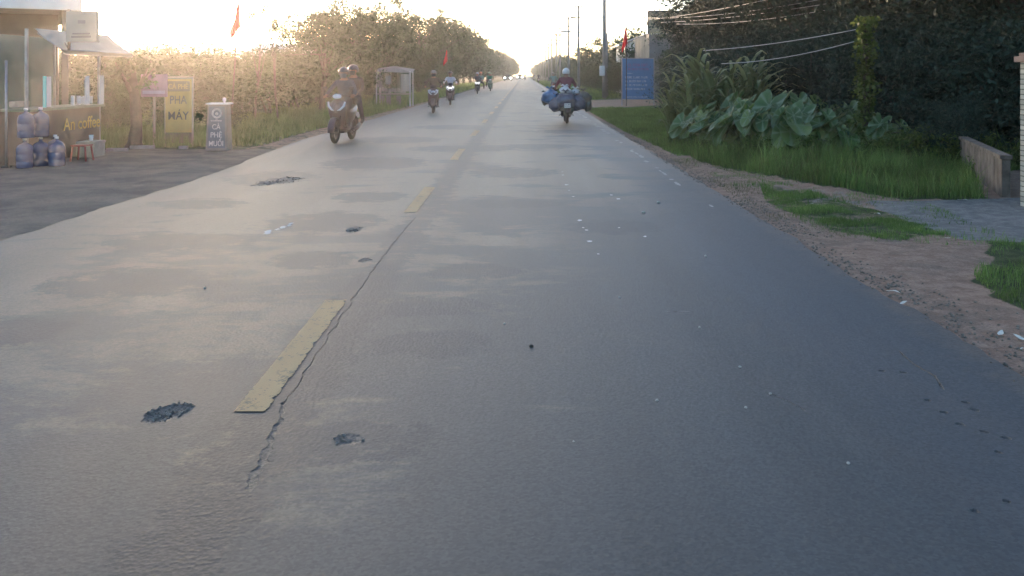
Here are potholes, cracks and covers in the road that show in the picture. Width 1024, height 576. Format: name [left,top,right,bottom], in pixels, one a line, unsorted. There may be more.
pothole [333,433,365,446]
pothole [141,401,197,425]
pothole [251,176,305,186]
crack [245,217,416,492]
